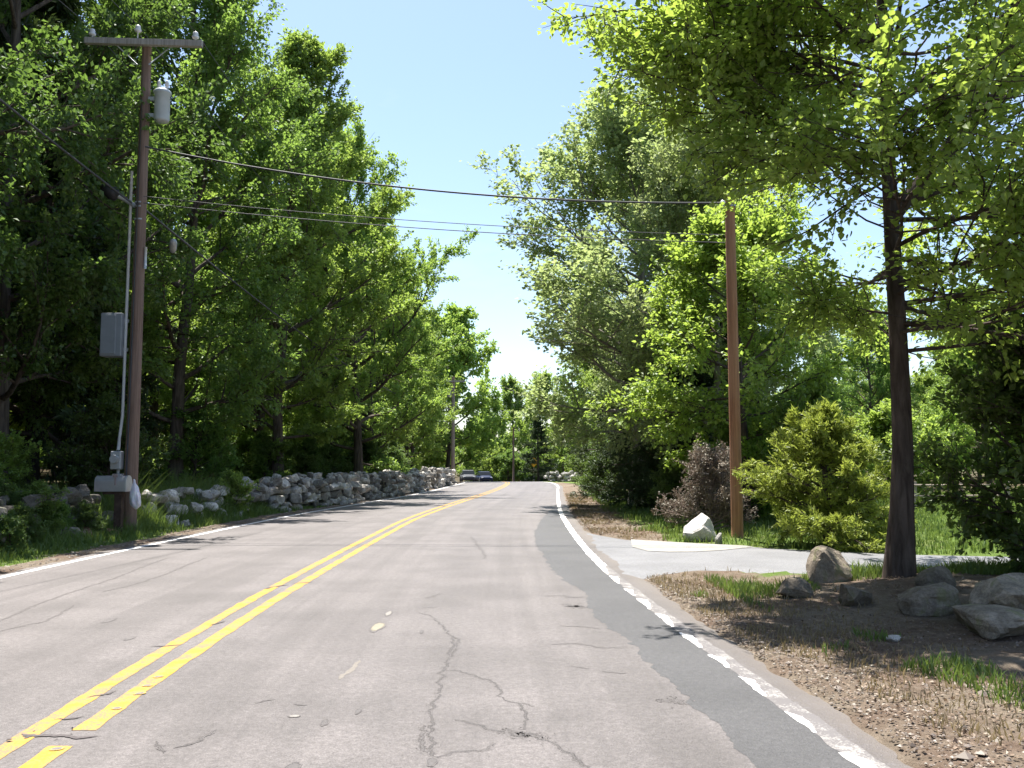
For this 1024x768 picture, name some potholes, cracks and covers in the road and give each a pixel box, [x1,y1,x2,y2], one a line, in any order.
crack [469,537,487,559]
crack [552,626,621,648]
crack [1,605,74,631]
crack [415,593,591,768]
crack [153,729,217,753]
crack [104,558,204,592]
